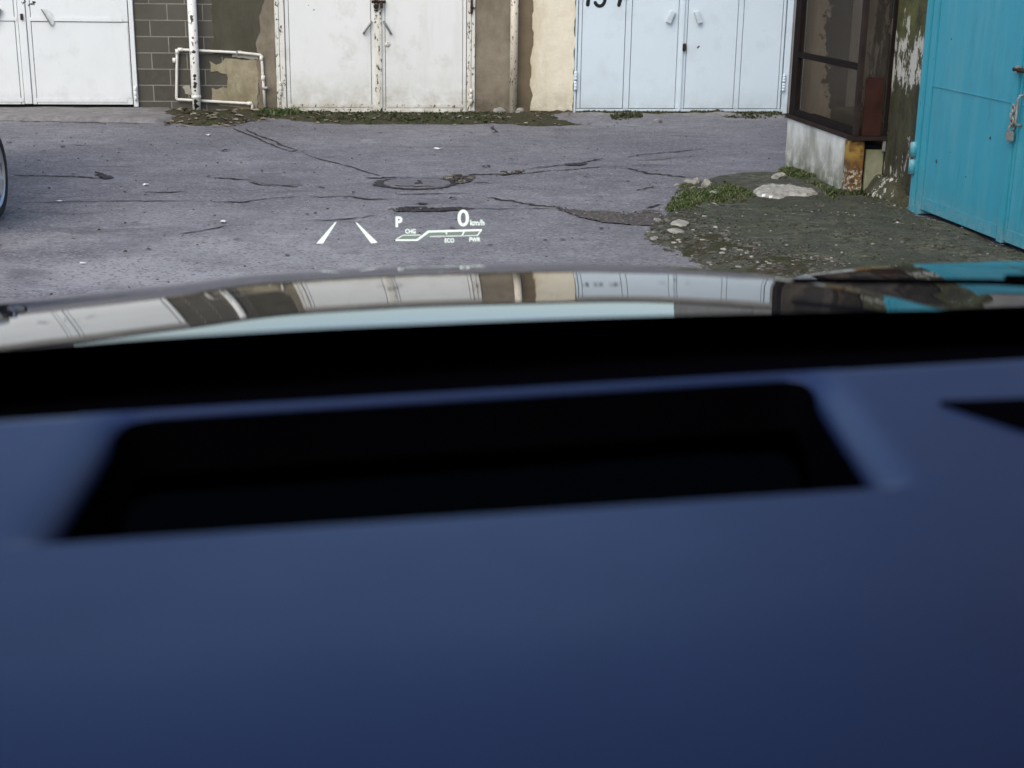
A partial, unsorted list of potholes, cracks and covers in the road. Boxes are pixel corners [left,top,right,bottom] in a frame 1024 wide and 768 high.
crack [11,191,192,202]
manhole cover [374,177,458,190]
crack [213,127,393,220]
crack [421,148,703,220]
